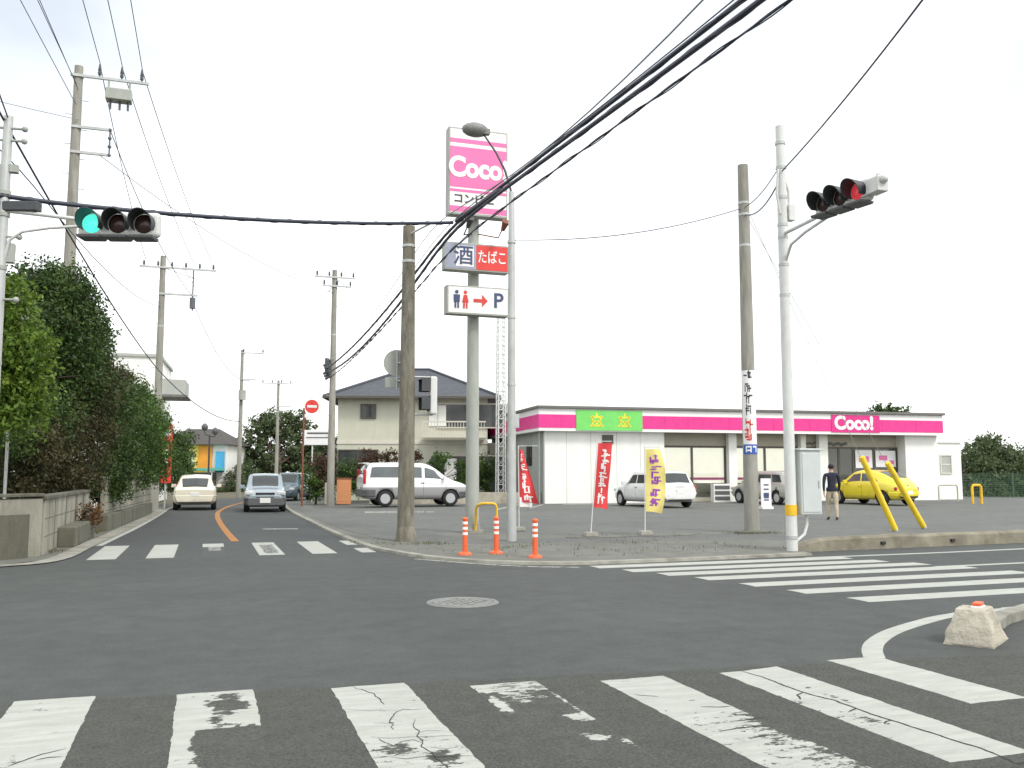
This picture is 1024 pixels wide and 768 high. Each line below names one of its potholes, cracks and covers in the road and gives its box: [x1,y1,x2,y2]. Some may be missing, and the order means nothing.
manhole cover [426,597,499,608]
crack [739,670,1024,765]
crack [352,688,471,768]
